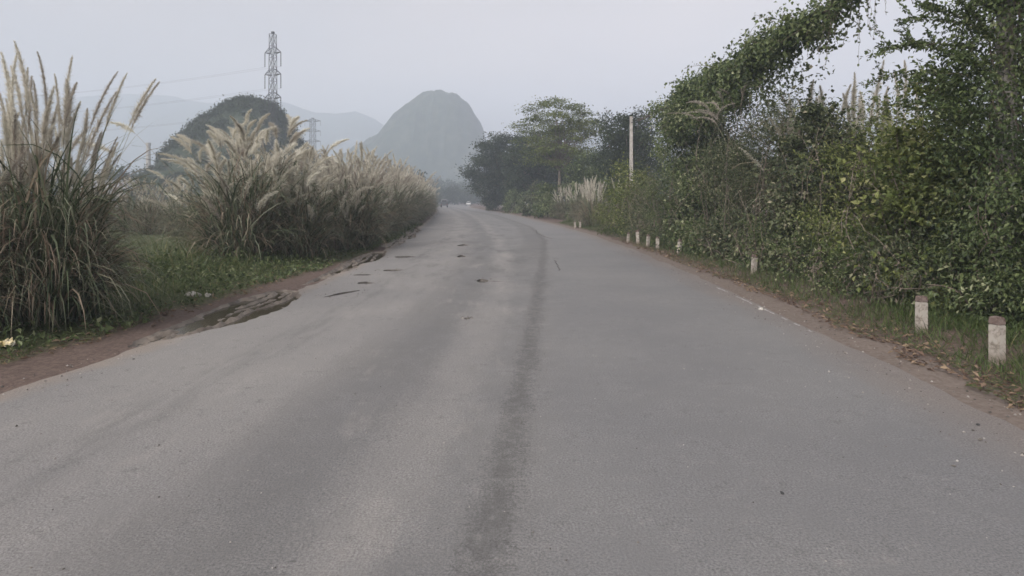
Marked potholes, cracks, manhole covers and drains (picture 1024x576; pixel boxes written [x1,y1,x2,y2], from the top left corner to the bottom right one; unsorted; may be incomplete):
pothole [303,251,387,285]
pothole [128,290,301,347]
